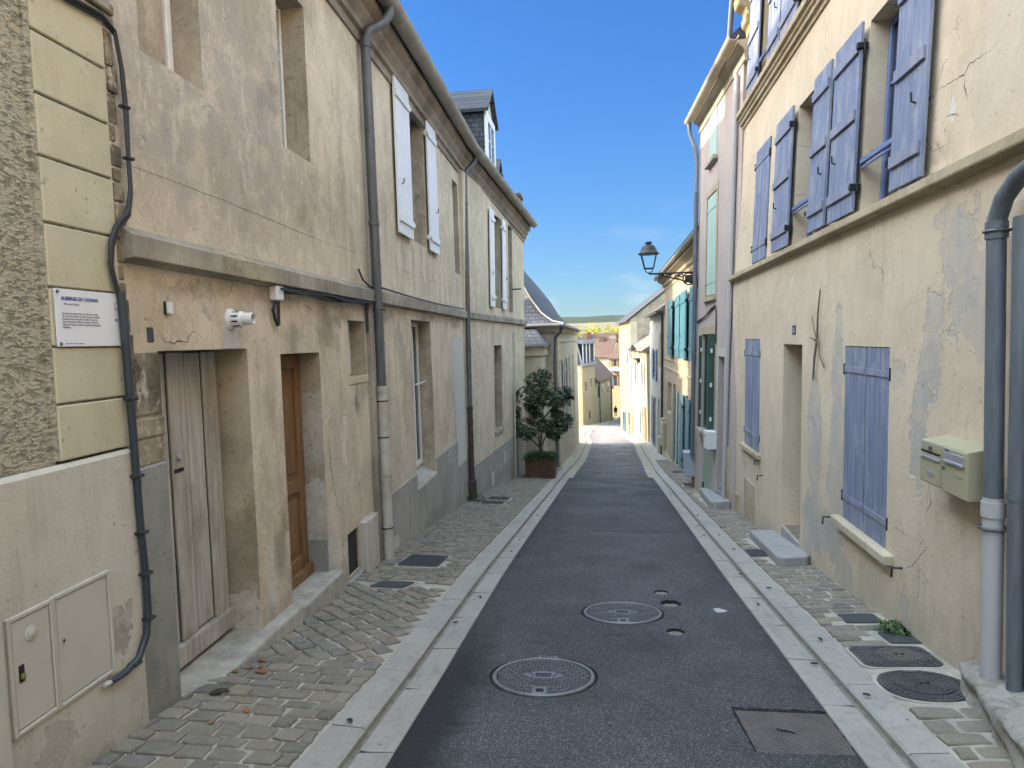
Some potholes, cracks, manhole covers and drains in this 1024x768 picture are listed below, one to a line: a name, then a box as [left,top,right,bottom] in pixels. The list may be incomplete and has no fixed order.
manhole cover [489,656,598,698]
manhole cover [582,602,664,625]
manhole cover [733,710,856,756]
manhole cover [872,670,967,704]
utility cover [393,554,452,569]
utility cover [367,580,418,590]
manhole cover [844,646,948,669]
utility cover [834,613,883,624]
utility cover [875,632,923,645]
